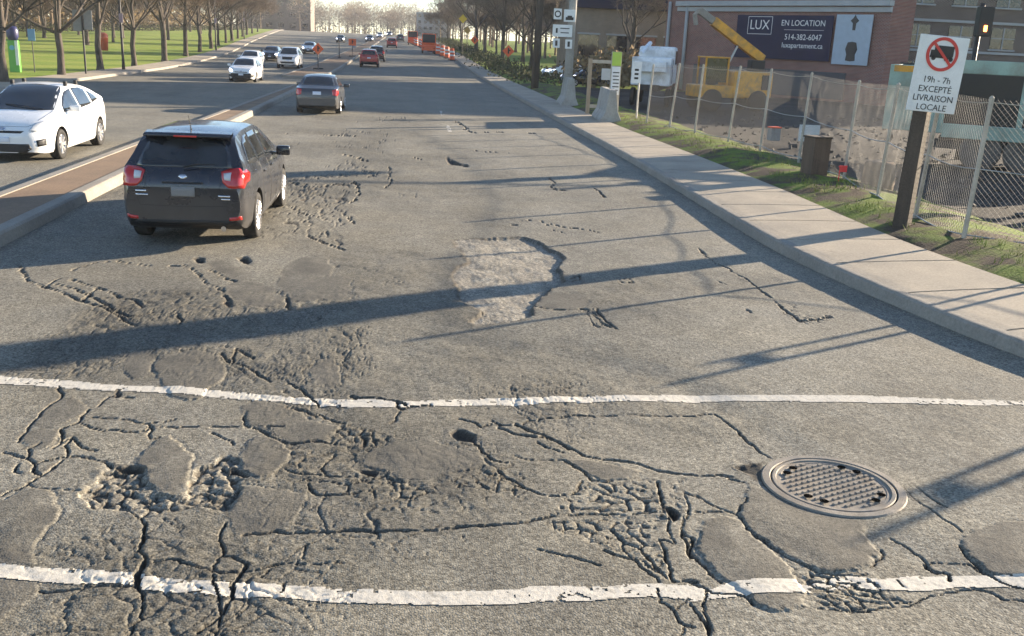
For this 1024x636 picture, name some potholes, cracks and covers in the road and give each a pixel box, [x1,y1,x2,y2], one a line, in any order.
crack [342,154,422,189]
manhole cover [761,455,908,518]
pothole [227,466,252,478]
crack [548,177,566,191]
crack [16,260,239,327]
crack [0,348,1024,636]
crack [279,181,361,251]
pothole [449,428,482,446]
crack [780,302,836,325]
pothole [658,504,684,523]
